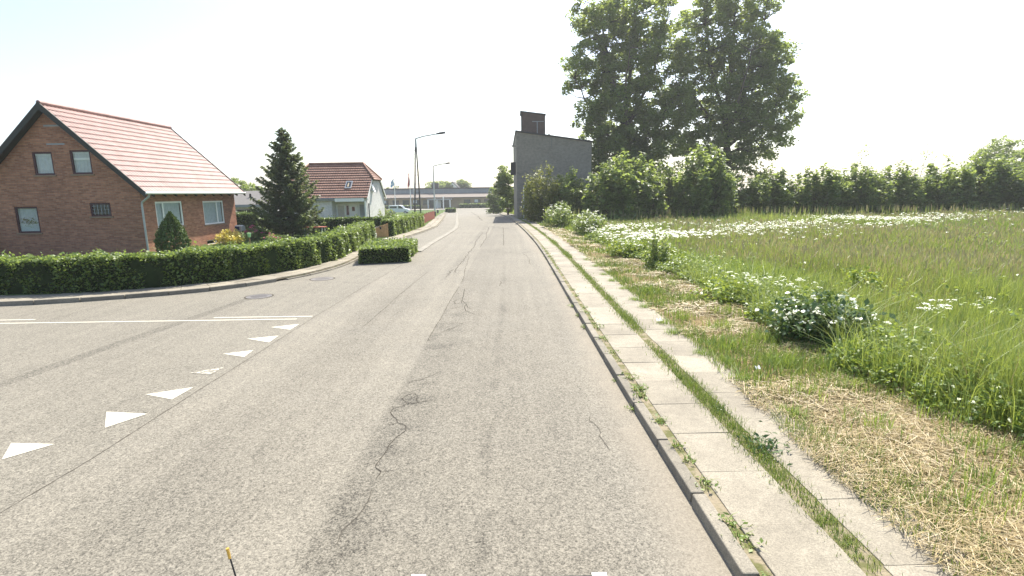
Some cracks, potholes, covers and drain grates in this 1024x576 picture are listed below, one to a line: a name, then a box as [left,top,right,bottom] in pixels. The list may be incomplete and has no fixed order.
crack [335,372,439,545]
crack [446,212,515,331]
